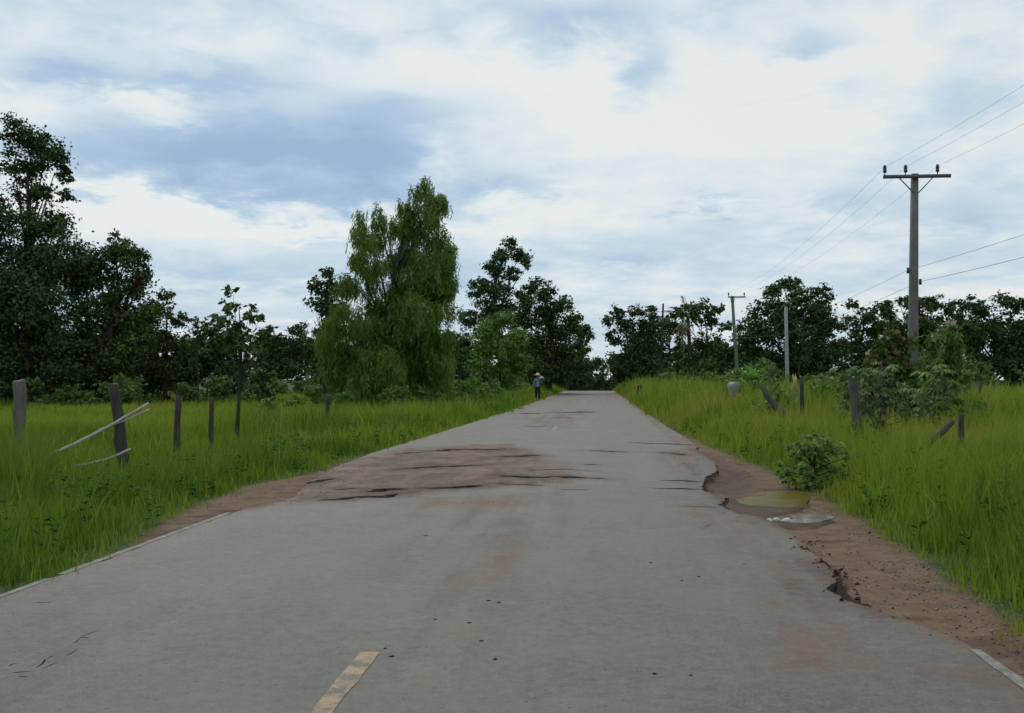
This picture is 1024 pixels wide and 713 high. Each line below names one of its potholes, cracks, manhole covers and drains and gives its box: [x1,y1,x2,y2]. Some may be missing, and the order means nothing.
crack [496,464,601,486]
pothole [825,564,859,603]
pothole [697,450,763,496]
crack [9,630,99,677]
pothole [772,518,838,531]
pothole [718,496,814,518]
